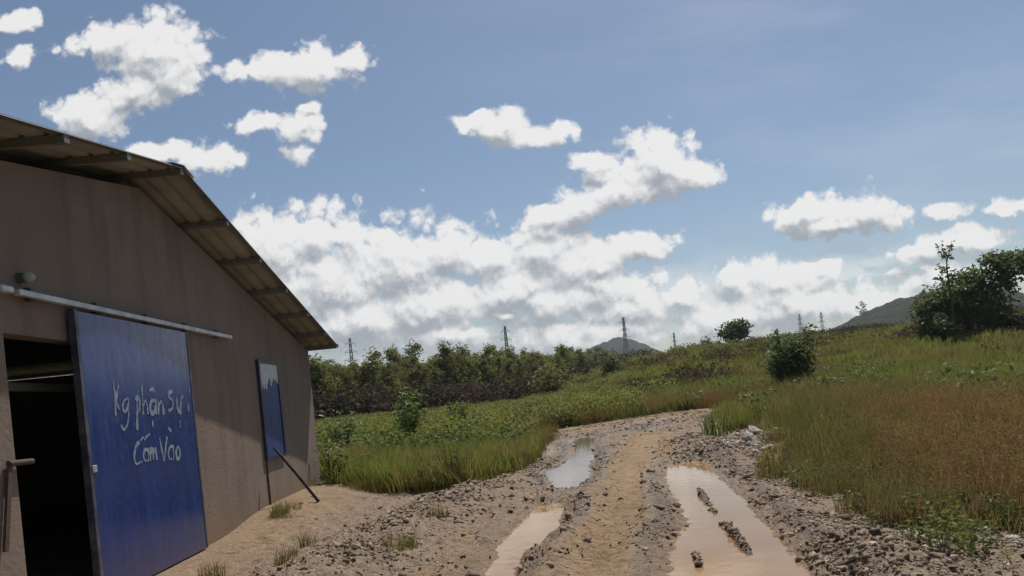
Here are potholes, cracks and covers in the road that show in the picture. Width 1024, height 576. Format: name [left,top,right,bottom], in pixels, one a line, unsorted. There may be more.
pothole [644,454,842,576]
pothole [461,495,579,576]
pothole [539,434,601,488]
